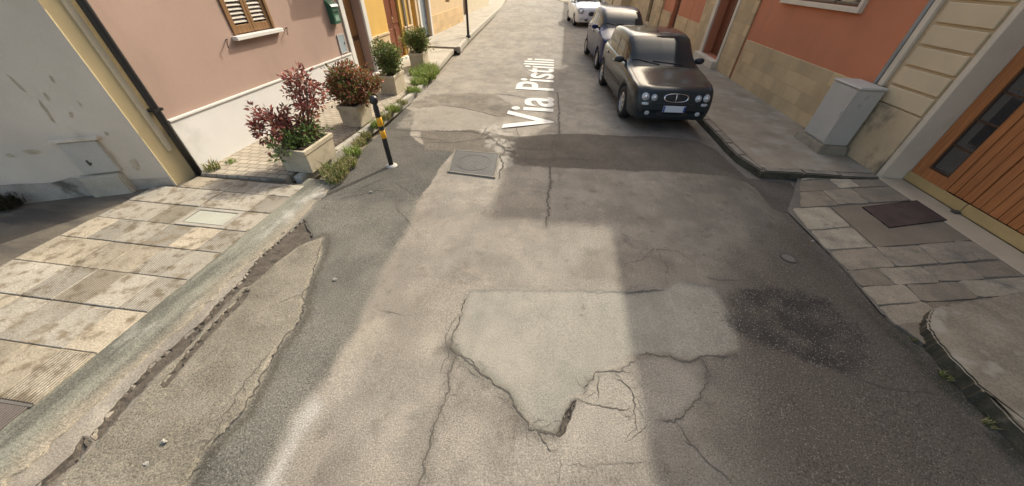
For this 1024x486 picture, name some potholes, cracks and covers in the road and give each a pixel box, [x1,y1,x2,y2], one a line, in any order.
crack [418,299,739,486]
crack [177,245,328,485]
crack [392,92,605,227]
manhole cover [447,150,500,179]
utility cover [779,252,798,263]
utility cover [173,207,245,230]
